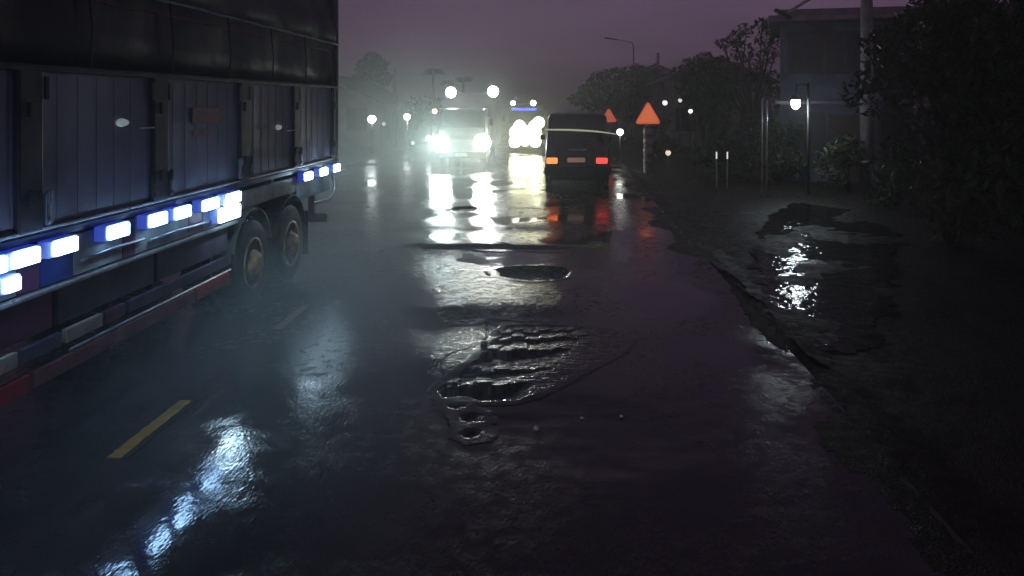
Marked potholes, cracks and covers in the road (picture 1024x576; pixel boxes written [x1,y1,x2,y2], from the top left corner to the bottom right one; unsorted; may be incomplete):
pothole [433,396,481,417]
pothole [444,406,499,432]
pothole [446,421,500,446]
pothole [427,322,638,407]
